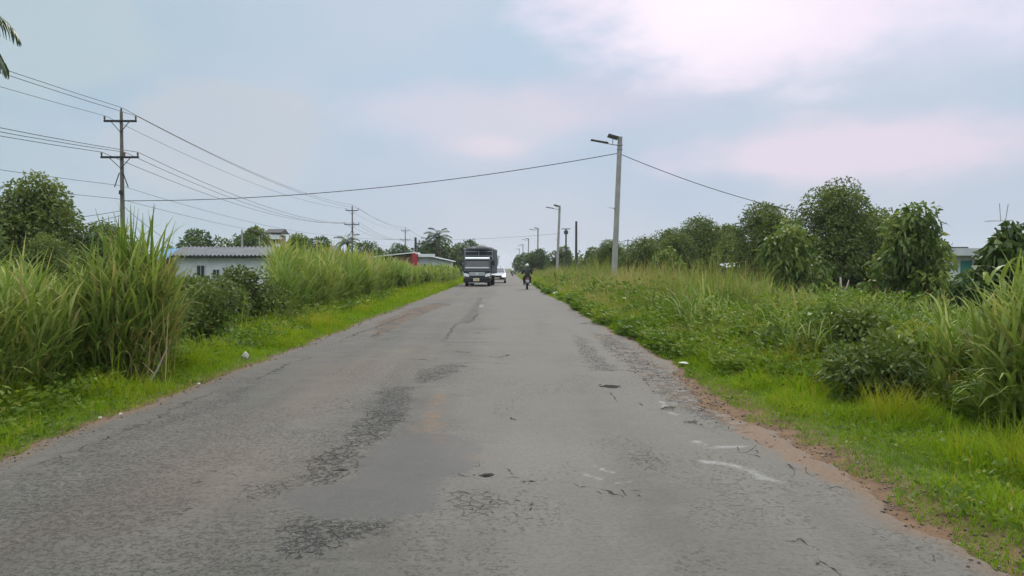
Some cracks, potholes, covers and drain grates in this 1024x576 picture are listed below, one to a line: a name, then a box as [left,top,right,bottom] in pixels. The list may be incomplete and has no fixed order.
pothole [470,472,504,481]
crack [194,410,409,499]
crack [252,357,311,381]
crack [574,342,714,414]
crack [275,521,389,560]
crack [448,463,534,519]
crack [573,483,642,497]
